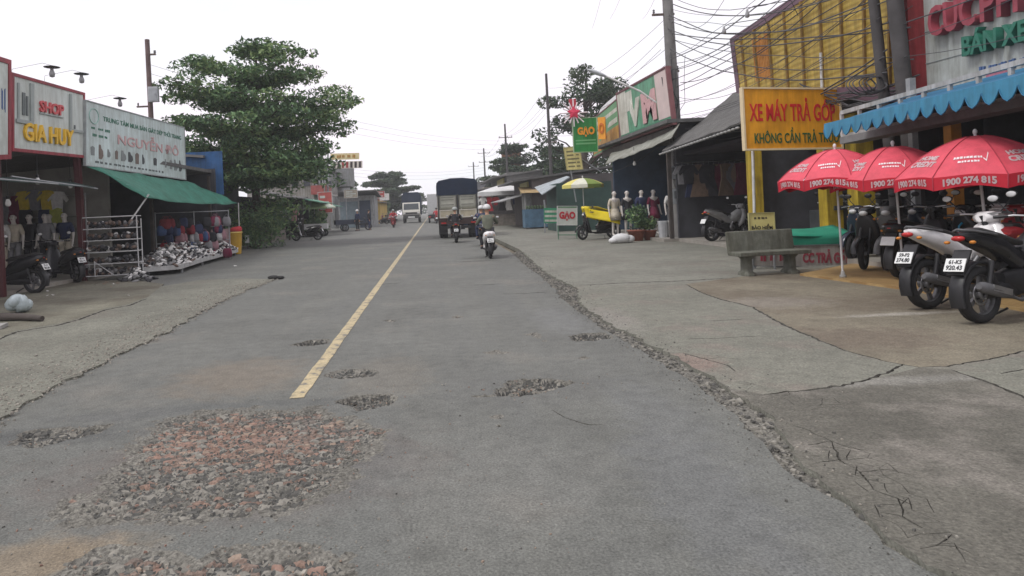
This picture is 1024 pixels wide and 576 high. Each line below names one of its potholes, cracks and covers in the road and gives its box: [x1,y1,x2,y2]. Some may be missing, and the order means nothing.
pothole [290,339,332,347]
pothole [328,393,401,413]
pothole [0,423,119,451]
crack [513,249,1024,576]
pothole [30,404,403,541]
pothole [563,332,619,343]
pothole [44,537,372,576]
pothole [461,376,585,399]
pothole [318,368,385,381]
crack [0,299,145,339]
